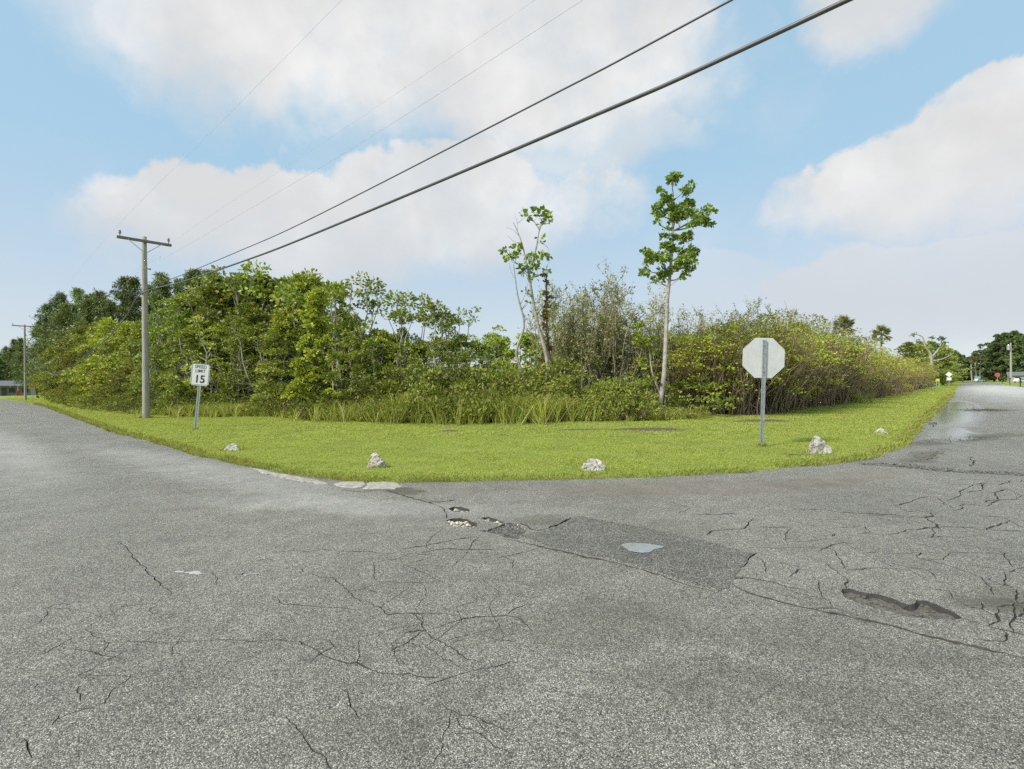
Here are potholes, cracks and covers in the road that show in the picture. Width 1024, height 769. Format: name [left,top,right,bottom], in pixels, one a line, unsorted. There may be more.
crack [670,457,1024,642]
pothole [841,589,961,619]
pothole [447,518,477,528]
crack [38,517,717,769]
